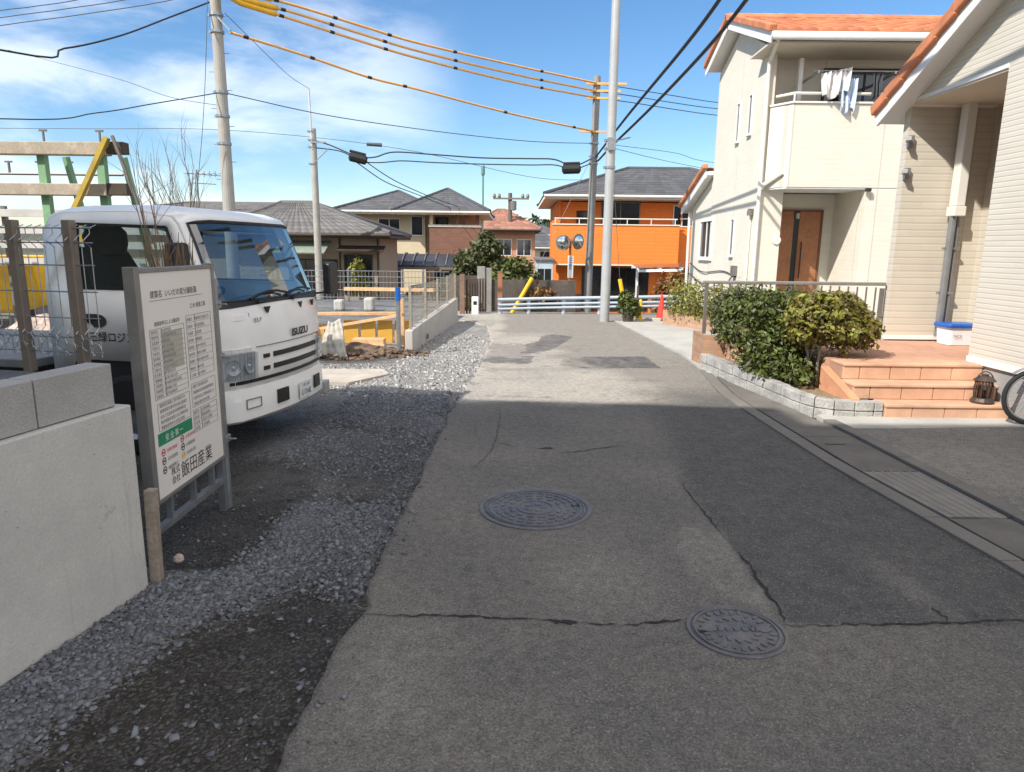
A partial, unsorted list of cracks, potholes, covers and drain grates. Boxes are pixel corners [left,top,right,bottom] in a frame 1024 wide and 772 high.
crack [682,480,1024,627]
crack [445,412,511,467]
manhole cover [479,488,592,531]
crack [366,613,683,626]
drain grate [862,471,1007,520]
manhole cover [686,605,789,660]
